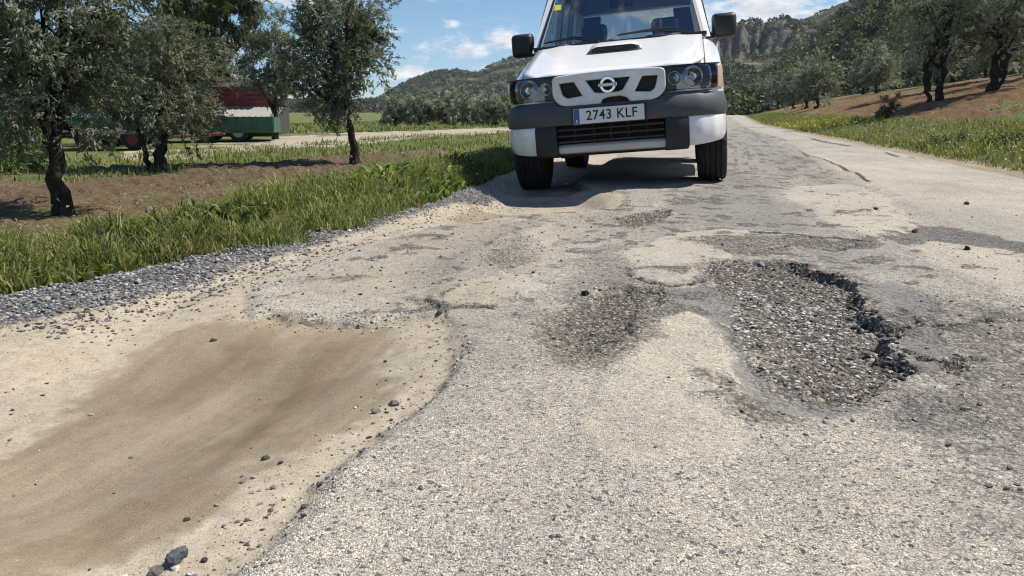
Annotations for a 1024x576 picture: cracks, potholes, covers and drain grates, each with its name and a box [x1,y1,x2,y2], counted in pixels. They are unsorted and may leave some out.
crack [424,298,496,318]
crack [801,139,870,182]
pothole [0,311,402,576]
pothole [537,285,675,365]
pothole [706,258,925,410]
pothole [611,209,675,229]
